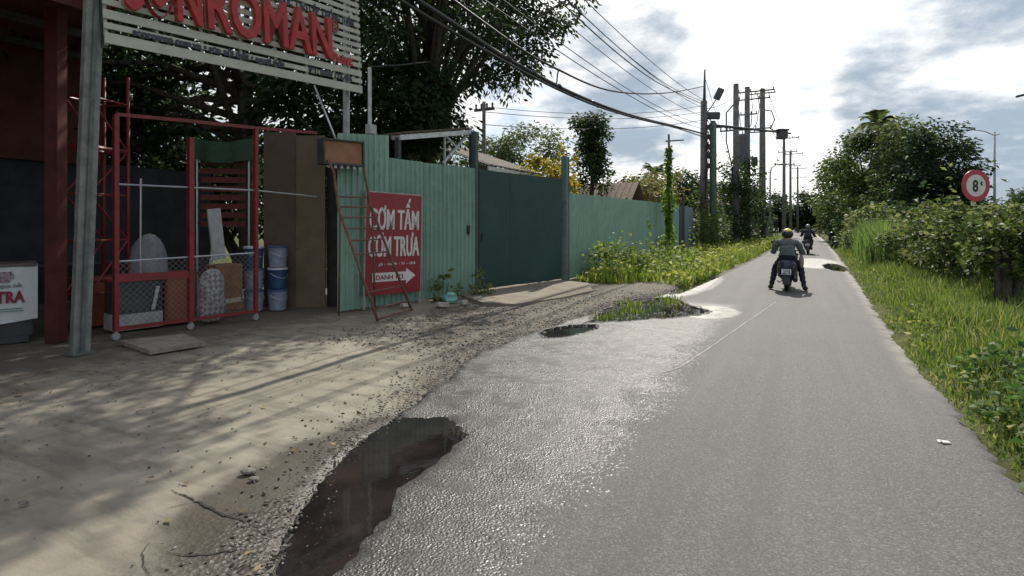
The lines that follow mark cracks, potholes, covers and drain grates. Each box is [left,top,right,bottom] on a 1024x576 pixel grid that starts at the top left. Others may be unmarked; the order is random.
pothole [537,324,599,339]
crack [141,489,282,576]
pothole [821,263,849,272]
pothole [272,417,469,576]
pothole [583,297,713,324]
